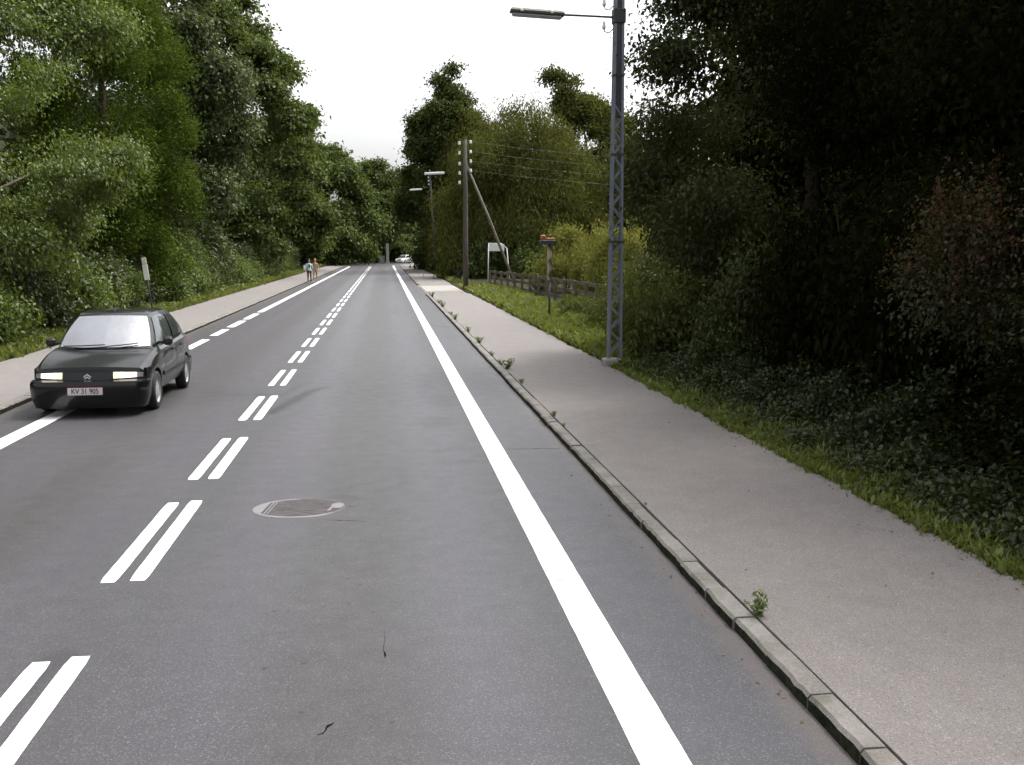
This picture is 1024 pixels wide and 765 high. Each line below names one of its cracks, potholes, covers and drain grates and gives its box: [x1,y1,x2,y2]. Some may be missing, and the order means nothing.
manhole cover [252,498,346,518]
